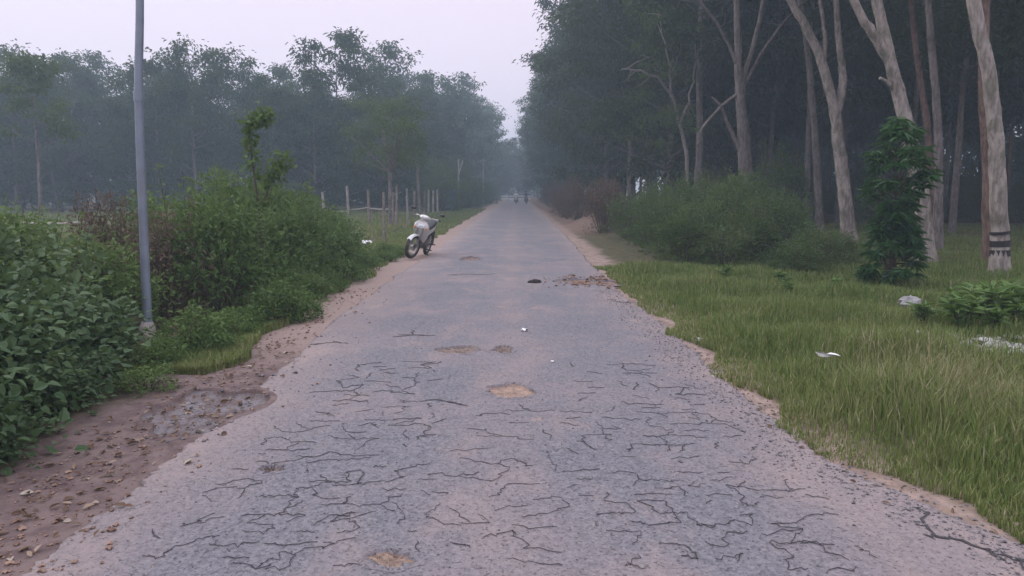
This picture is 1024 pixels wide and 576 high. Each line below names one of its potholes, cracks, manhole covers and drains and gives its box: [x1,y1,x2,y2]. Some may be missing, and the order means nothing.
crack [915,507,1024,570]
pothole [132,387,278,441]
crack [142,361,877,574]
pothole [353,545,427,573]
pothole [481,382,541,399]
pothole [431,345,485,355]
pothole [485,345,518,354]
